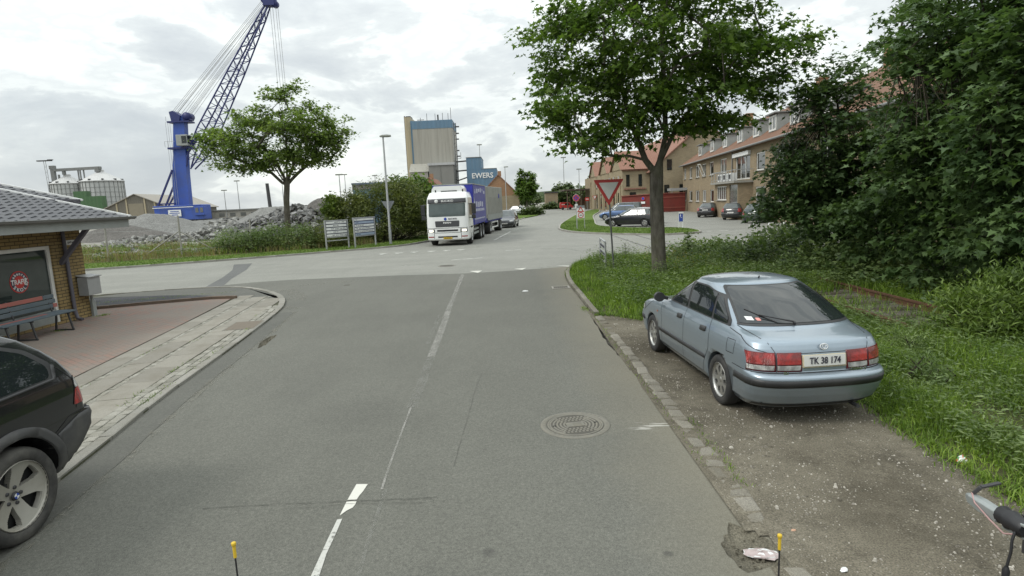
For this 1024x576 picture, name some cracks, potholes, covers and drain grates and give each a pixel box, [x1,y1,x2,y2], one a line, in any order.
manhole cover [541,412,610,439]
pothole [721,522,789,573]
